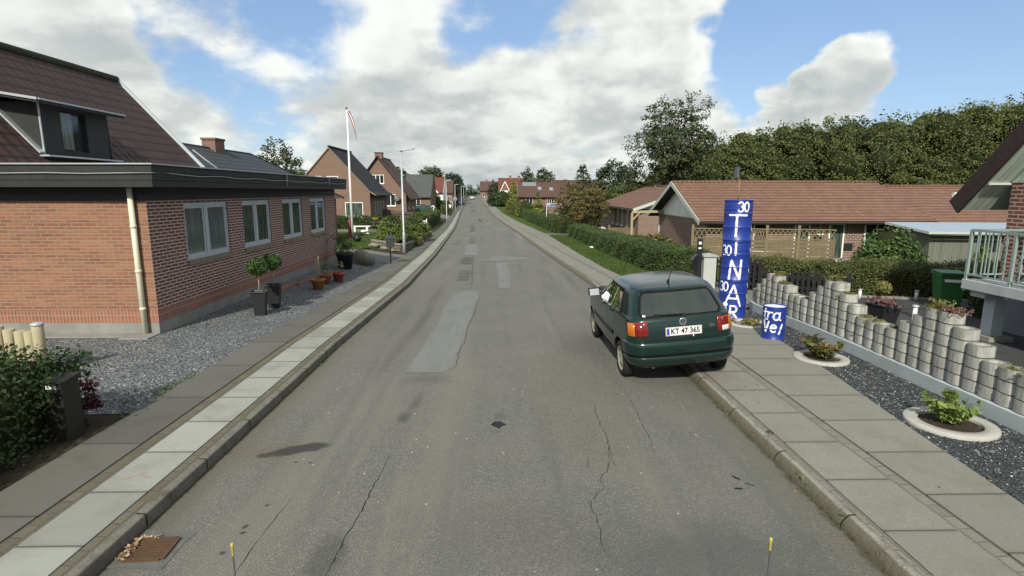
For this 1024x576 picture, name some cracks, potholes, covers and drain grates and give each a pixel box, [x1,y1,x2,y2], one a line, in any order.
crack [561,383,654,554]
drain grate [115,534,181,563]
crack [325,459,388,576]
